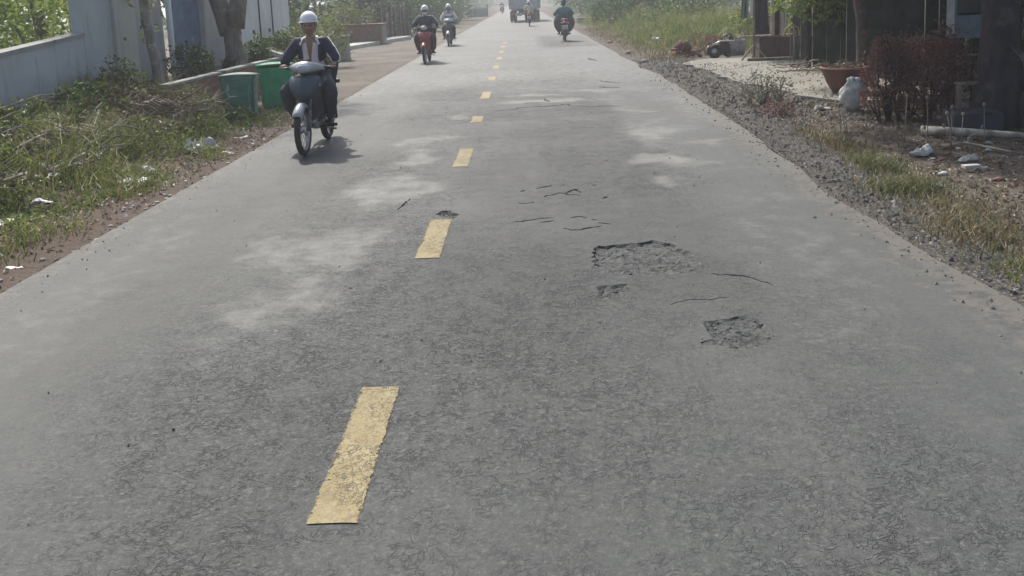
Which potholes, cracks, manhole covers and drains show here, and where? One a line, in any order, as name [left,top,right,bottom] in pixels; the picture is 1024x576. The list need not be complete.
pothole [591,240,706,276]
crack [671,273,773,305]
pothole [700,315,776,349]
pothole [436,210,460,219]
crack [516,185,609,231]
pothole [596,284,630,300]
